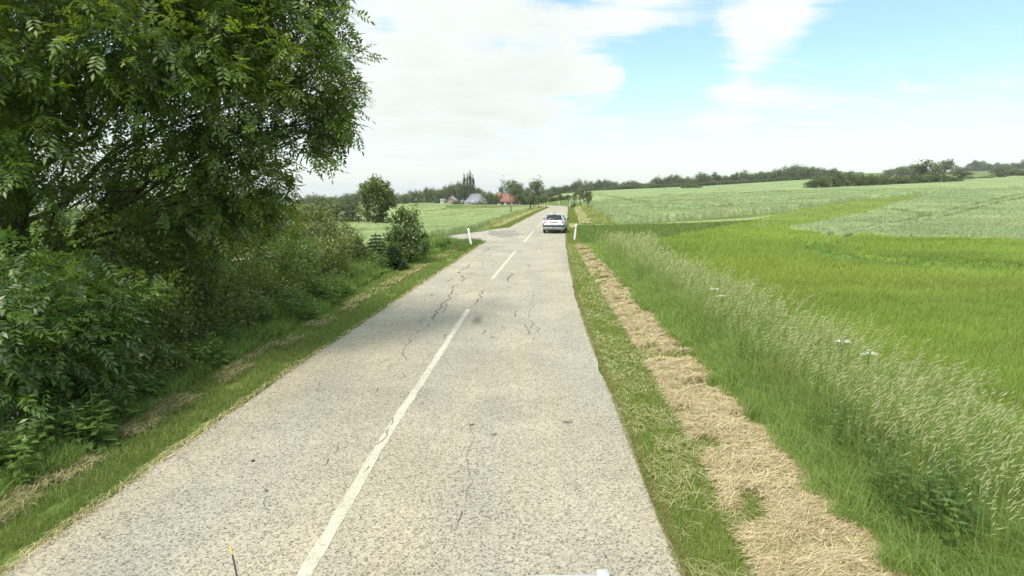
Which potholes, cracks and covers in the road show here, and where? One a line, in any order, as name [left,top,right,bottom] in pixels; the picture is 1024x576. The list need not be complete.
crack [374,248,489,378]
crack [482,294,540,339]
